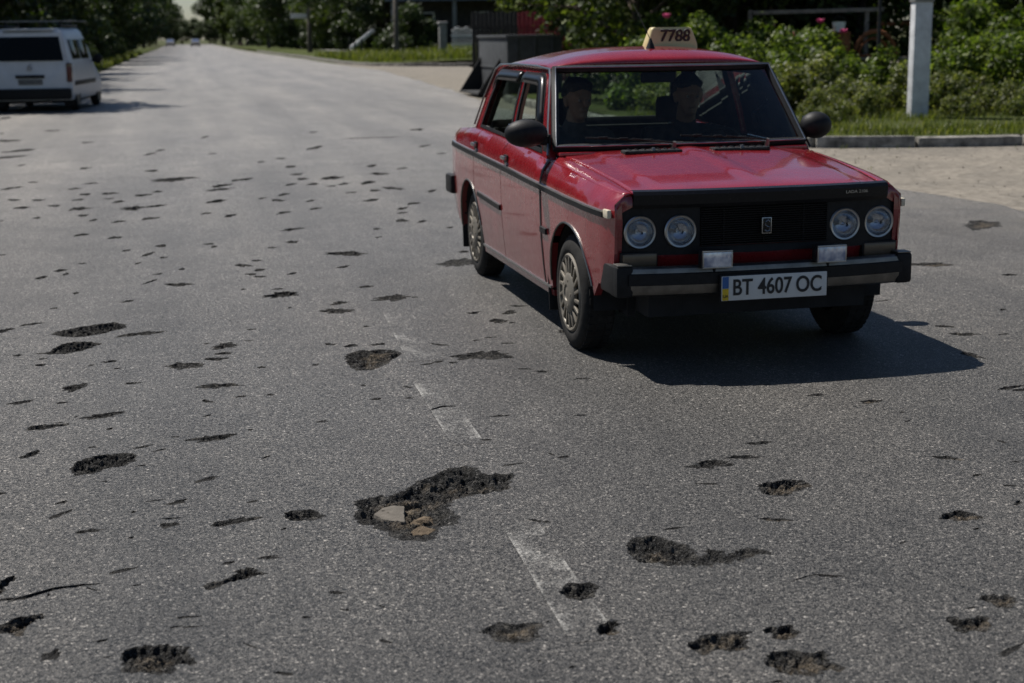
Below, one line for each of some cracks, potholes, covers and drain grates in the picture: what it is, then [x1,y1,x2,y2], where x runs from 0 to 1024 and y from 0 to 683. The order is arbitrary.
pothole [36,341,102,355]
pothole [763,649,846,677]
pothole [344,349,402,371]
pothole [963,220,1003,231]
pothole [69,453,137,477]
pothole [353,466,515,542]
pothole [559,581,600,601]
crack [0,583,102,603]
pothole [977,594,1018,609]
pothole [0,613,46,637]
pothole [625,535,772,568]
pothole [757,479,813,497]
